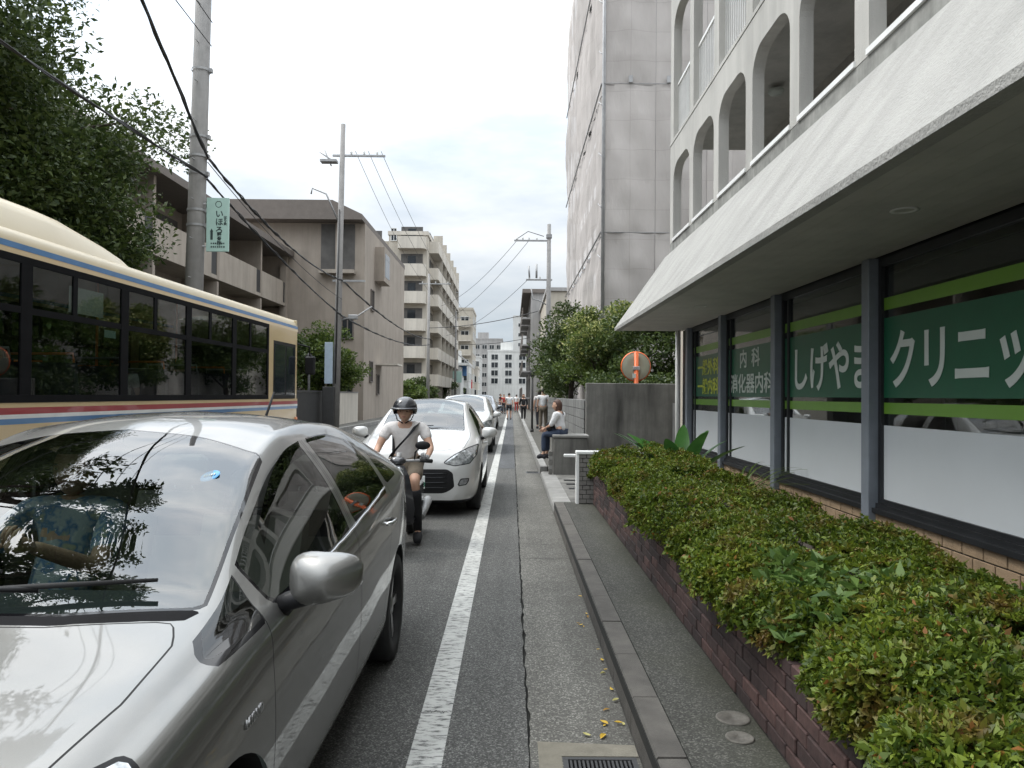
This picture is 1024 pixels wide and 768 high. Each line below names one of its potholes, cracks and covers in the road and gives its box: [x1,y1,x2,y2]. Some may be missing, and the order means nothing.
drain grate [563,757,639,768]
manhole cover [725,731,754,745]
crack [512,408,560,768]
manhole cover [716,711,751,726]
